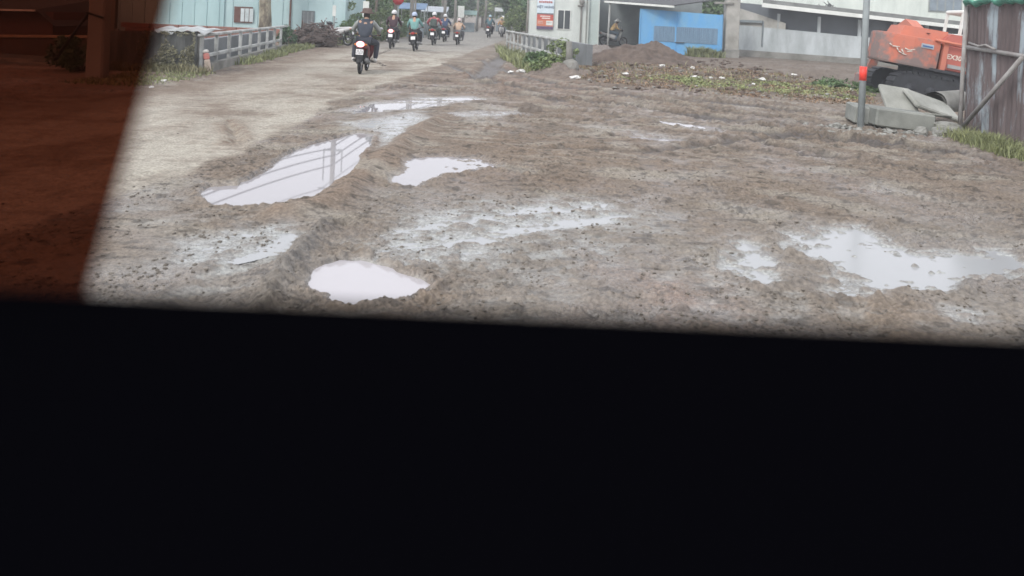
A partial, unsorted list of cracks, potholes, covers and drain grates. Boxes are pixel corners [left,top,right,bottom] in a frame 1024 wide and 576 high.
pothole [765,219,1024,300]
pothole [380,150,511,187]
pothole [296,248,441,306]
pothole [709,234,805,292]
pothole [194,129,381,208]
